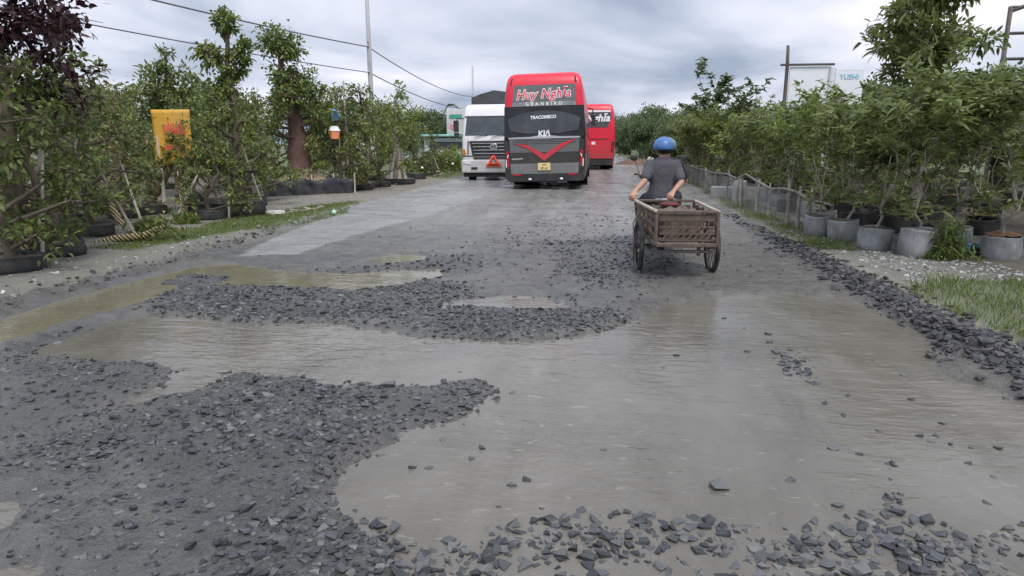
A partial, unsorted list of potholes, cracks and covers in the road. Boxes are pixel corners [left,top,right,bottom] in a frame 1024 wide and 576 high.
pothole [0,287,1024,576]
pothole [355,250,436,263]
pothole [0,259,465,343]
